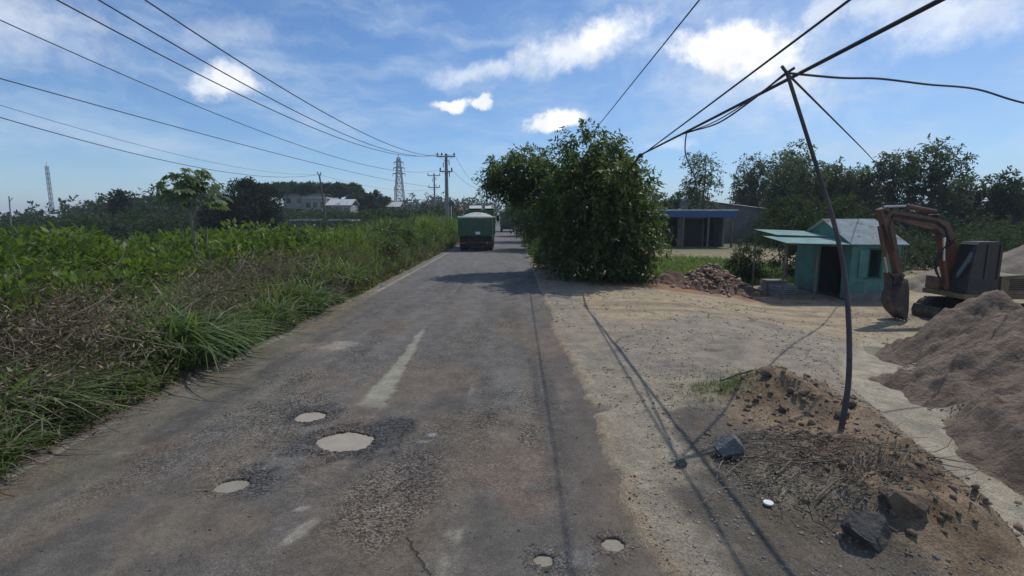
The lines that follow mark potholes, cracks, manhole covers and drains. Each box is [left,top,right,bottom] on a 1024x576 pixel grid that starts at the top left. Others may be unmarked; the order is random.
pothole [195,472,267,500]
pothole [304,426,385,457]
pothole [282,407,337,426]
crack [406,537,433,576]
